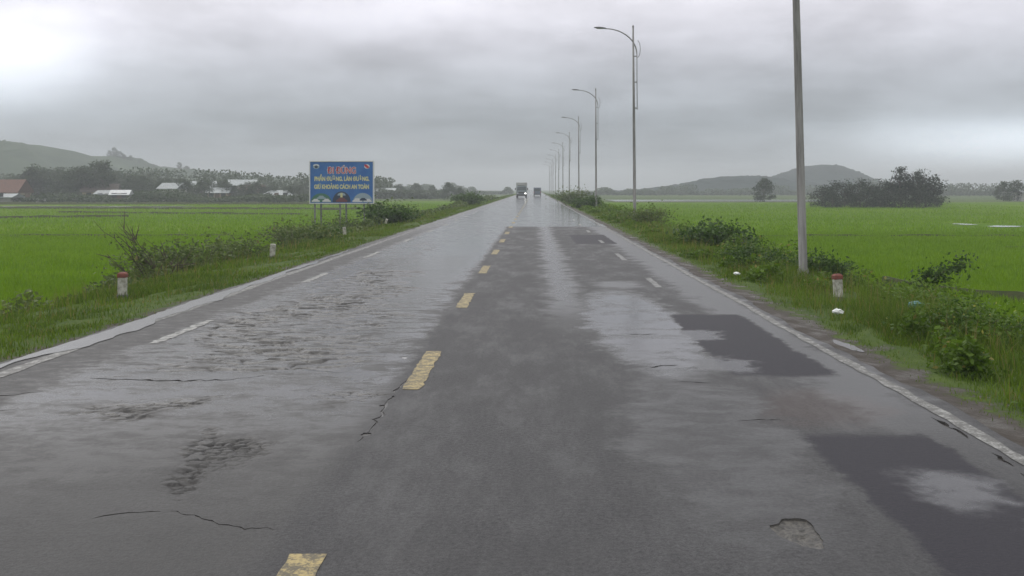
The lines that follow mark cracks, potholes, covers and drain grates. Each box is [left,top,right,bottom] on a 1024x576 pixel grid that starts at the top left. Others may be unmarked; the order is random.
crack [55,270,432,530]
crack [931,417,969,439]
pothole [769,518,824,549]
